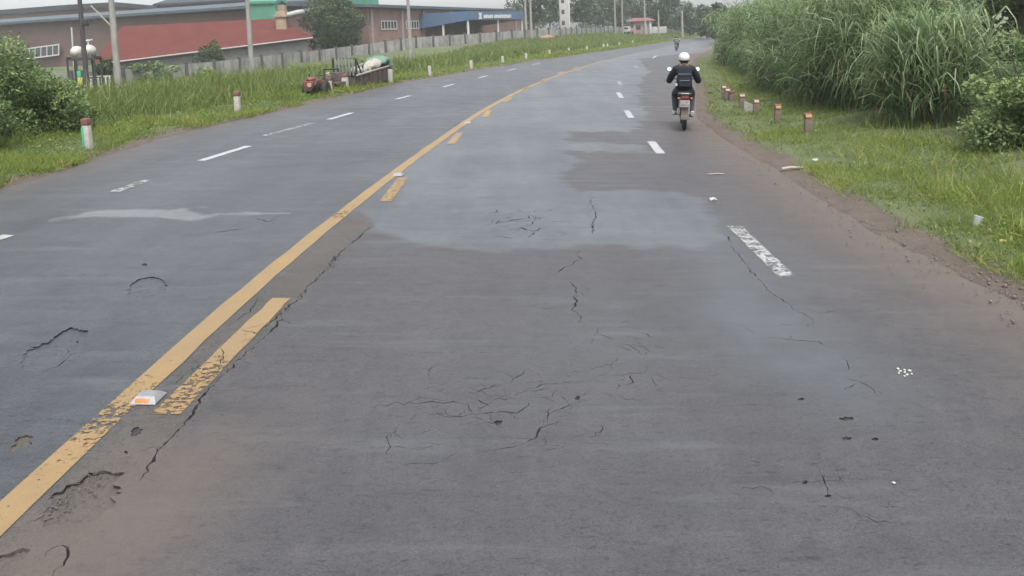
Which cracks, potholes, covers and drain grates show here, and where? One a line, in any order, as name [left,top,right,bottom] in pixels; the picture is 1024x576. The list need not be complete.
crack [739,455,896,531]
pothole [9,435,33,454]
pothole [34,470,124,527]
crack [546,251,668,400]
crack [724,234,842,346]
crack [485,209,569,238]
crack [383,367,606,473]
crack [44,545,70,574]
pothole [20,327,88,372]
pothole [127,277,167,298]
